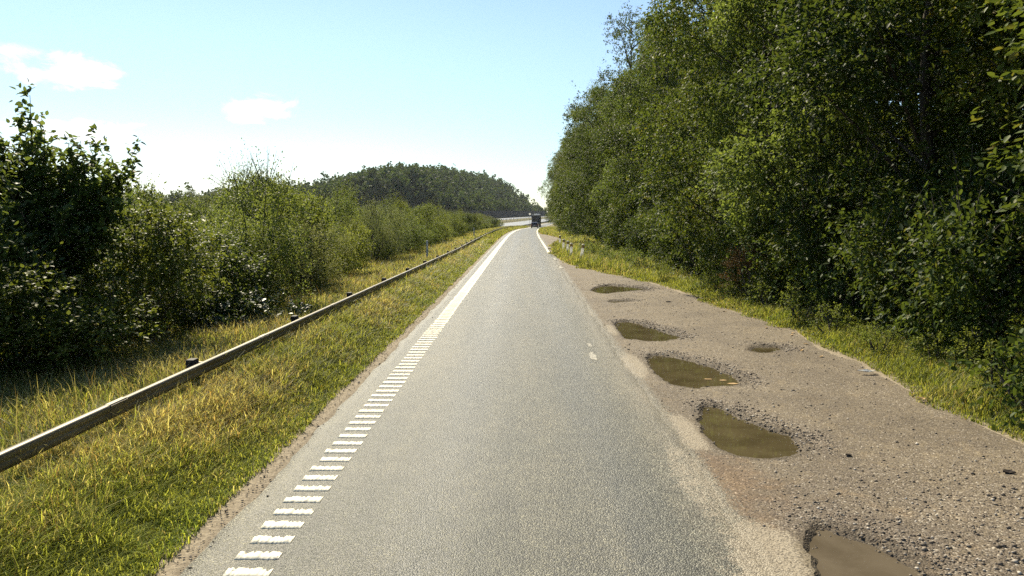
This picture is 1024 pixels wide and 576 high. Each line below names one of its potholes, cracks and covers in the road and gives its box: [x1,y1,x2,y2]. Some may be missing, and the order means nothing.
pothole [645,353,746,388]
pothole [803,521,937,576]
pothole [696,402,810,459]
pothole [590,284,648,294]
pothole [613,320,685,341]
pothole [747,344,790,353]
